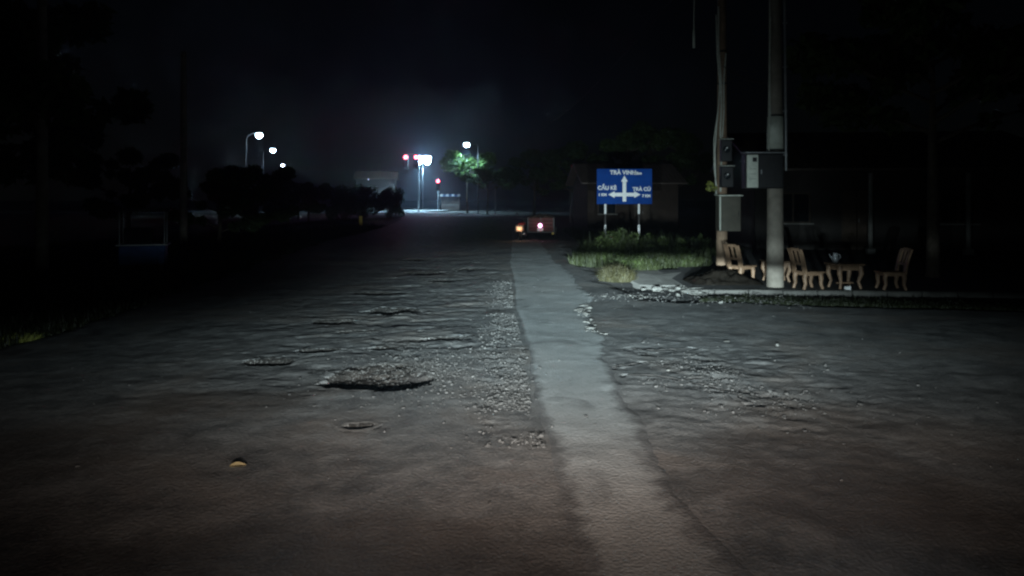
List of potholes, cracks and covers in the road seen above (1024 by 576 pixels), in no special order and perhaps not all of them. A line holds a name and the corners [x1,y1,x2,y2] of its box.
pothole [230,355,302,368]
pothole [289,347,346,355]
pothole [359,306,426,316]
pothole [307,361,444,394]
pothole [332,420,384,432]
pothole [305,318,362,326]
